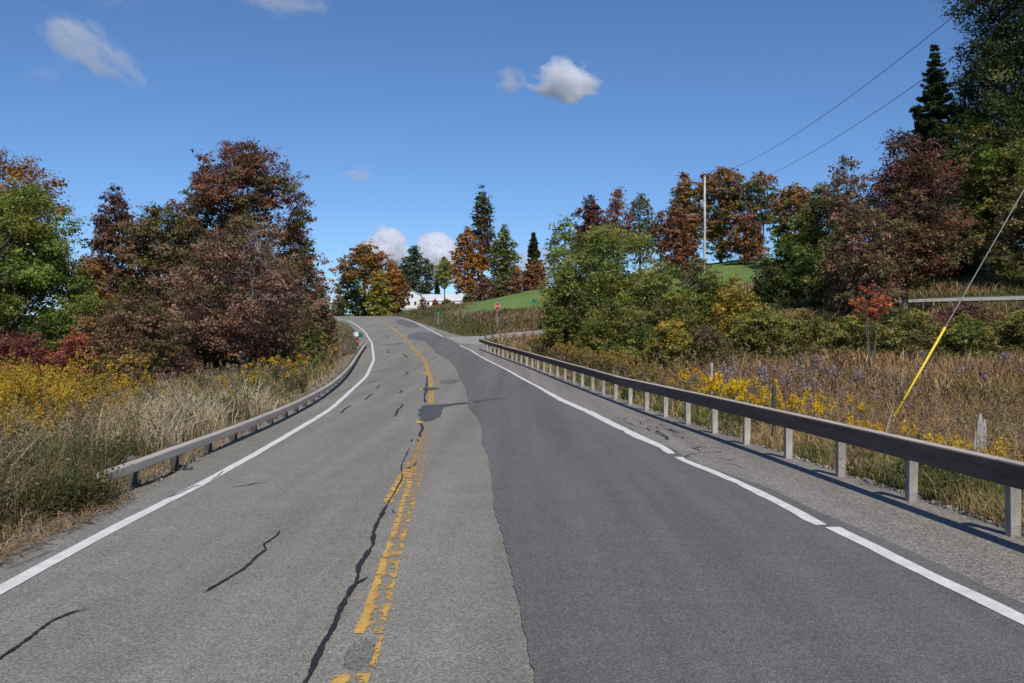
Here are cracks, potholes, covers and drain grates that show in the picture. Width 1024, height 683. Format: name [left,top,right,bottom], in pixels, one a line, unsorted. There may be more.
crack [0,607,92,658]
crack [202,531,280,593]
crack [615,417,745,469]
crack [302,331,424,683]
